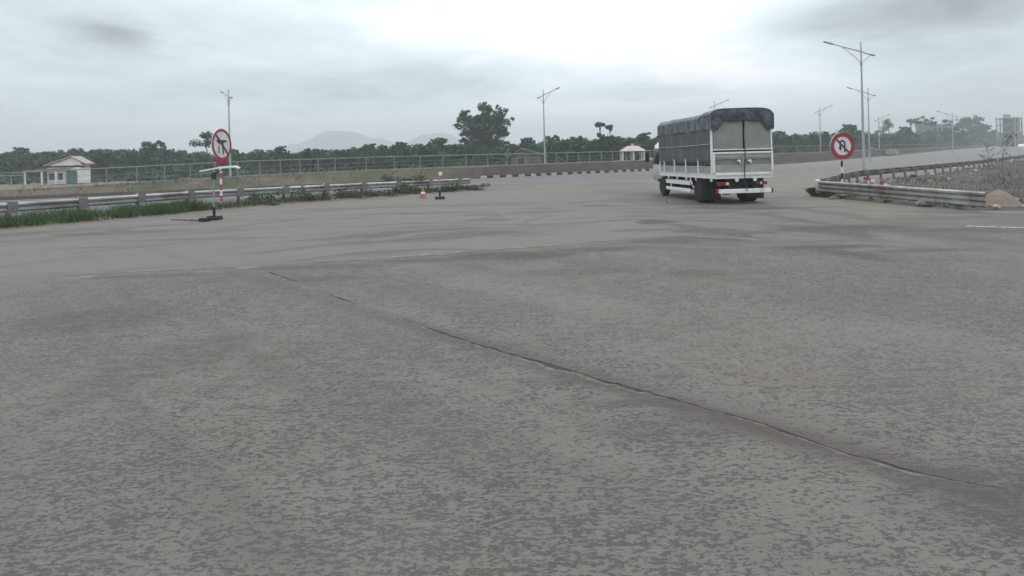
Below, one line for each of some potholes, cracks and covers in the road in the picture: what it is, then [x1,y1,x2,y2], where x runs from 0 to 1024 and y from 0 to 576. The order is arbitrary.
crack [38,236,1007,489]
